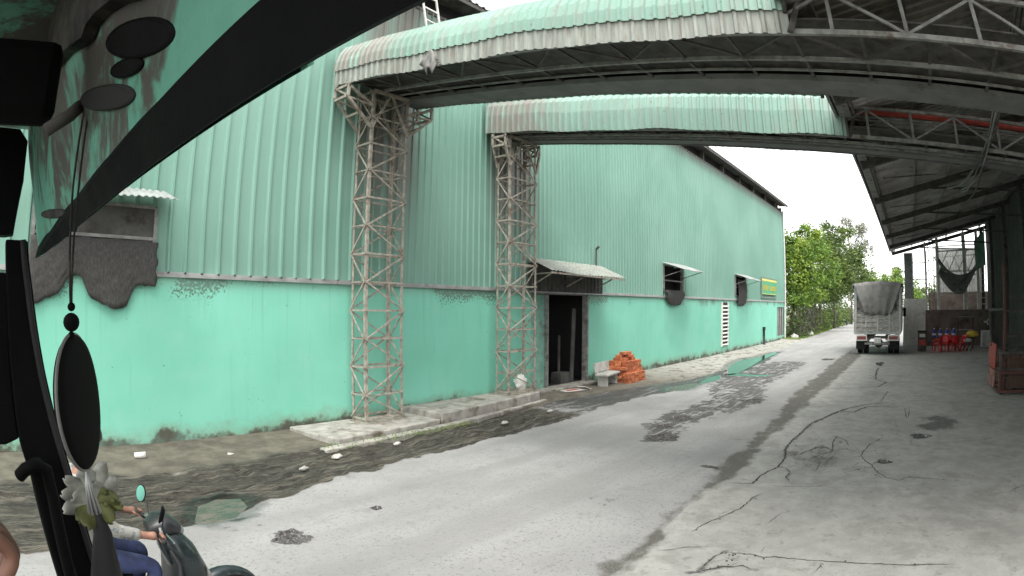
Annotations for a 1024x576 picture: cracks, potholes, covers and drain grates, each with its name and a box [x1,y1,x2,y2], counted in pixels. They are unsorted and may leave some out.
pothole [270,528,314,544]
crack [655,368,944,573]
